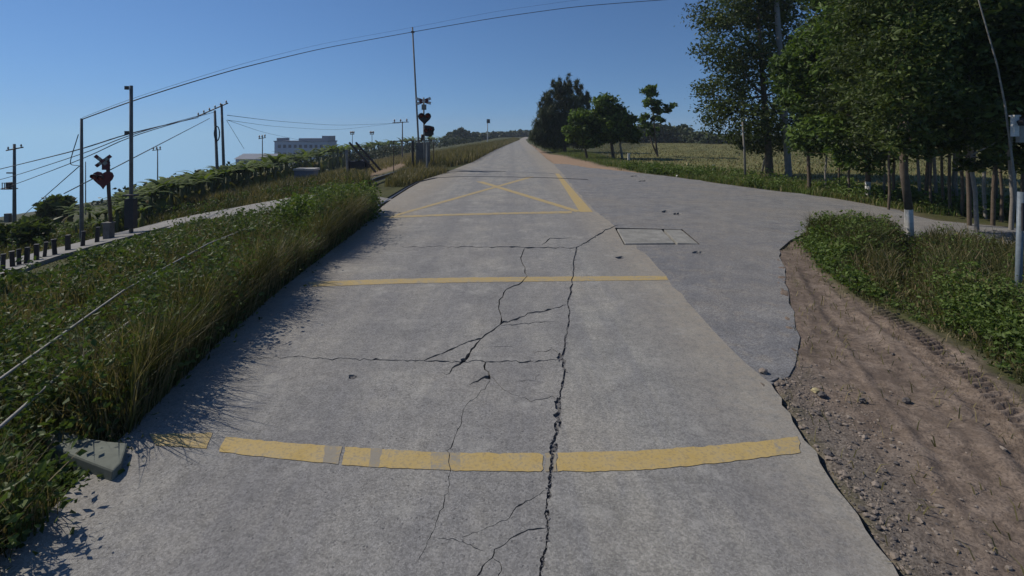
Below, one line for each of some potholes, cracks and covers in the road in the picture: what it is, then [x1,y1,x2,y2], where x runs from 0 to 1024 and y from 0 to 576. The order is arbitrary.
crack [243,225,617,576]
manhole cover [615,228,699,245]
